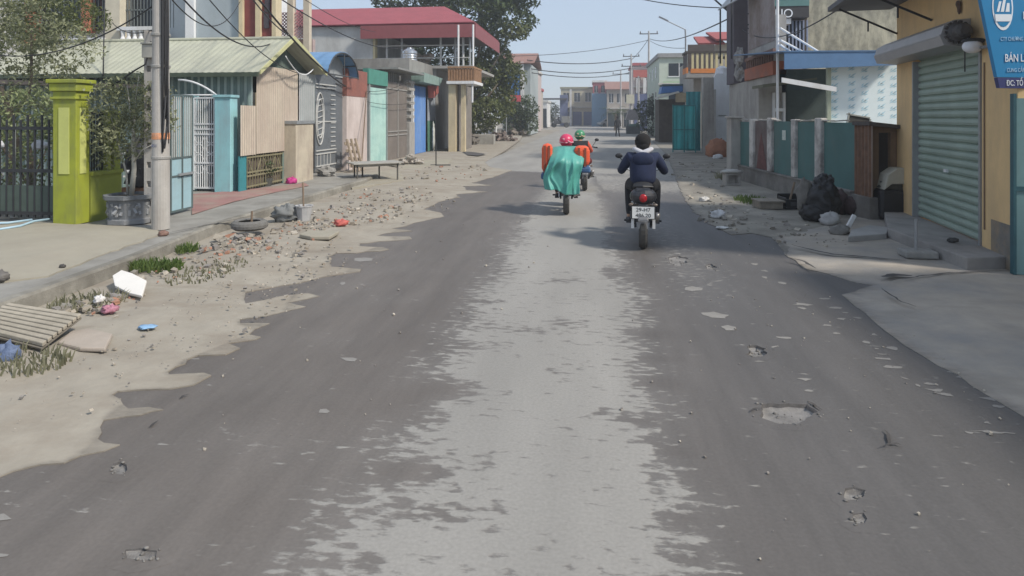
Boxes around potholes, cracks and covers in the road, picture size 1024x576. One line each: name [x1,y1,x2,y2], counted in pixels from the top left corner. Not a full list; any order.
pothole [94,455,144,483]
pothole [104,537,178,573]
pothole [739,341,778,360]
pothole [661,254,693,267]
pothole [748,398,831,431]
pothole [837,505,884,534]
crack [880,430,901,447]
pothole [827,479,883,508]
